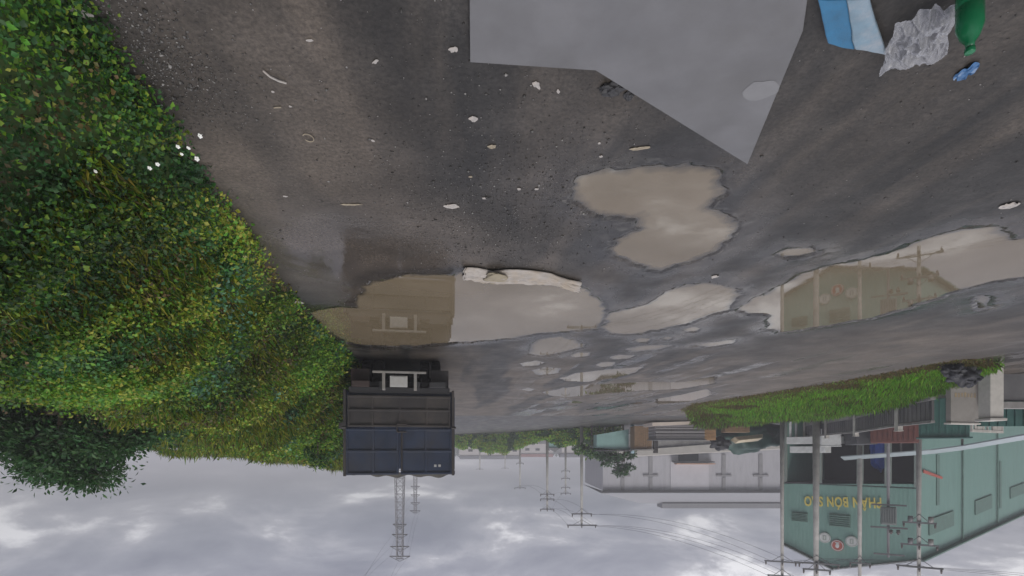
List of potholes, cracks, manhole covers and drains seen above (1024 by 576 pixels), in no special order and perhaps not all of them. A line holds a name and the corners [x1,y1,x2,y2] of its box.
pothole [598,281,748,335]
pothole [529,367,565,377]
pothole [562,158,749,274]
pothole [302,270,612,348]
pothole [731,224,1024,334]
pothole [652,389,716,405]
pothole [541,376,720,398]
pothole [558,367,646,383]
pothole [620,344,680,353]
pothole [525,336,588,358]
